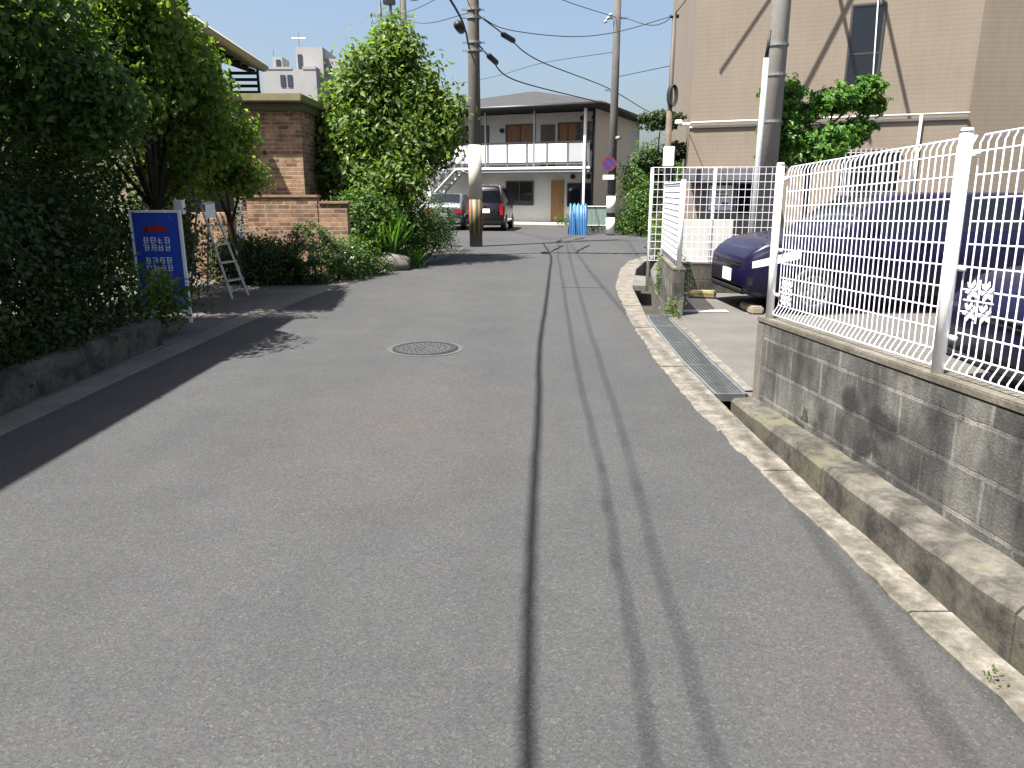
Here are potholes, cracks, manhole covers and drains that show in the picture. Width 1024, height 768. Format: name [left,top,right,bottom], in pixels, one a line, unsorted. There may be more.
drain grate [647,315,747,401]
manhole cover [387,341,464,357]
